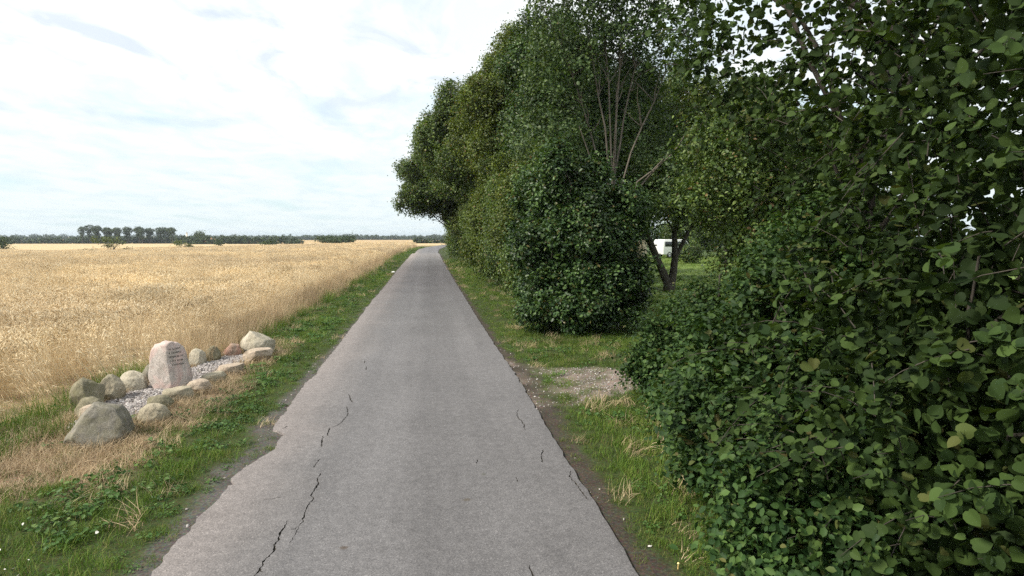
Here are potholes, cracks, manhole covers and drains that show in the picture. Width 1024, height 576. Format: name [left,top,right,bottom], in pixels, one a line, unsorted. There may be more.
crack [254,395,353,576]
